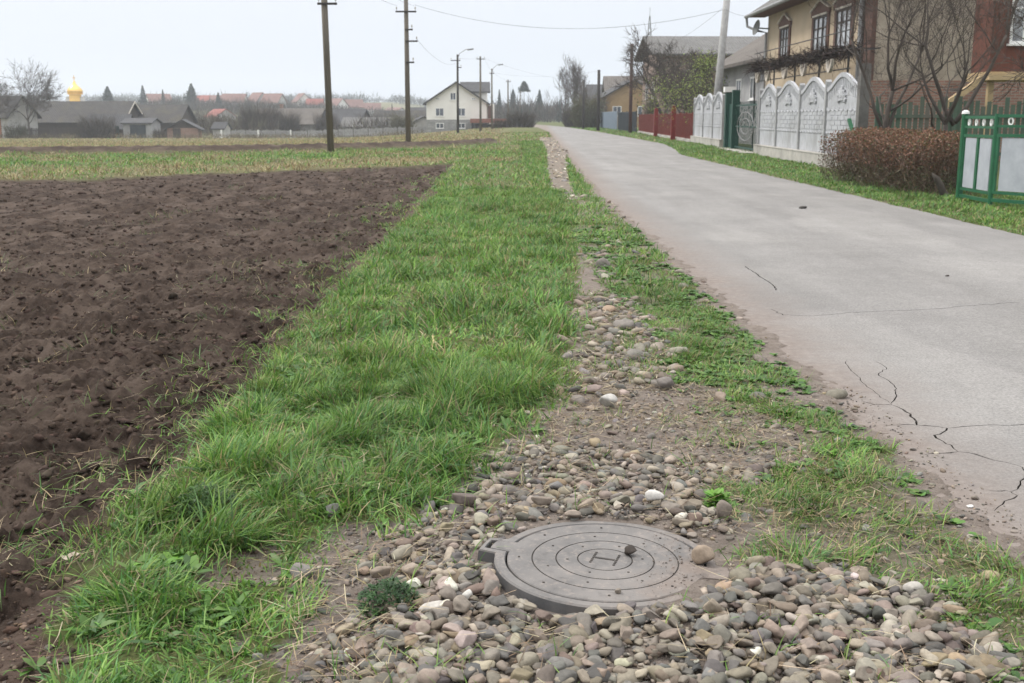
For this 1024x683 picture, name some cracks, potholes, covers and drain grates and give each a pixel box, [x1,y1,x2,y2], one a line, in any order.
manhole cover [477,521,730,616]
crack [845,362,1024,504]
